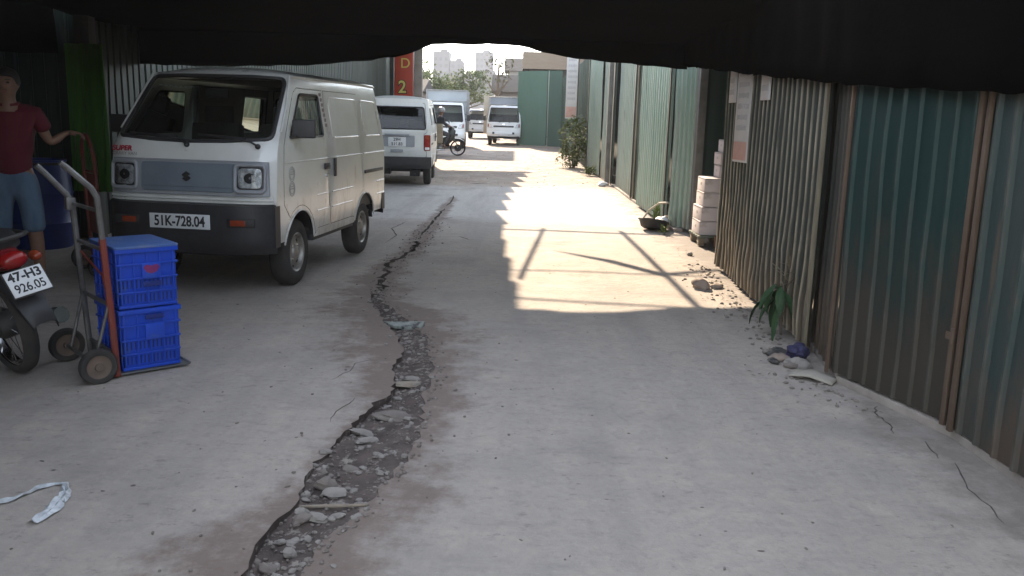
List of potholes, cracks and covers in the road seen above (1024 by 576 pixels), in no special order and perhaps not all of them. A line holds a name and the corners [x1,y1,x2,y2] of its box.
crack [955,463,1002,522]
crack [371,183,481,292]
